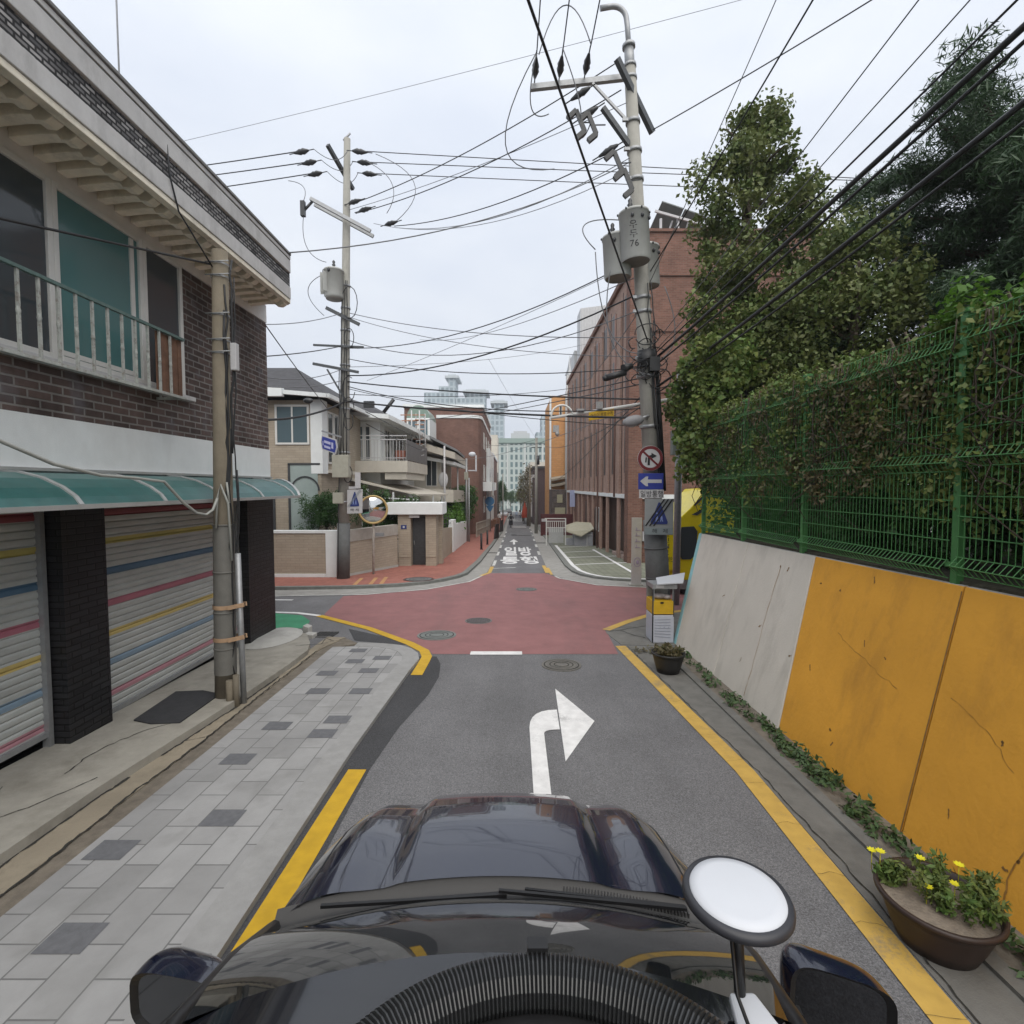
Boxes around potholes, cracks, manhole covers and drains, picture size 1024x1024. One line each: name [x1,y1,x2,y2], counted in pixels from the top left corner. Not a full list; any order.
manhole cover [542,659,581,672]
manhole cover [417,630,456,640]
